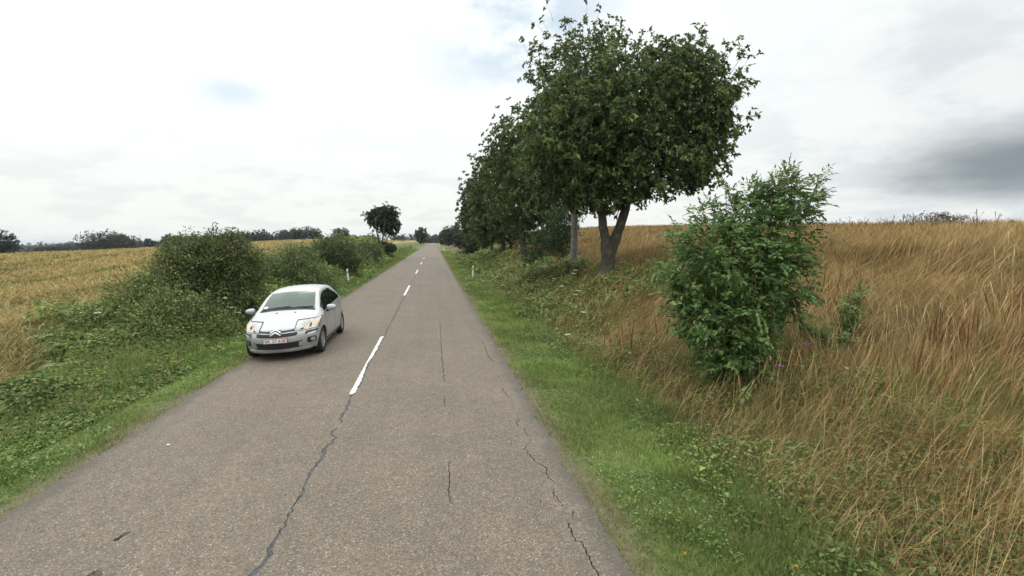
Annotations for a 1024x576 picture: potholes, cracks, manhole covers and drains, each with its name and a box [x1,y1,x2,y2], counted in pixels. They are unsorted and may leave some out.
crack [509,418,599,576]
